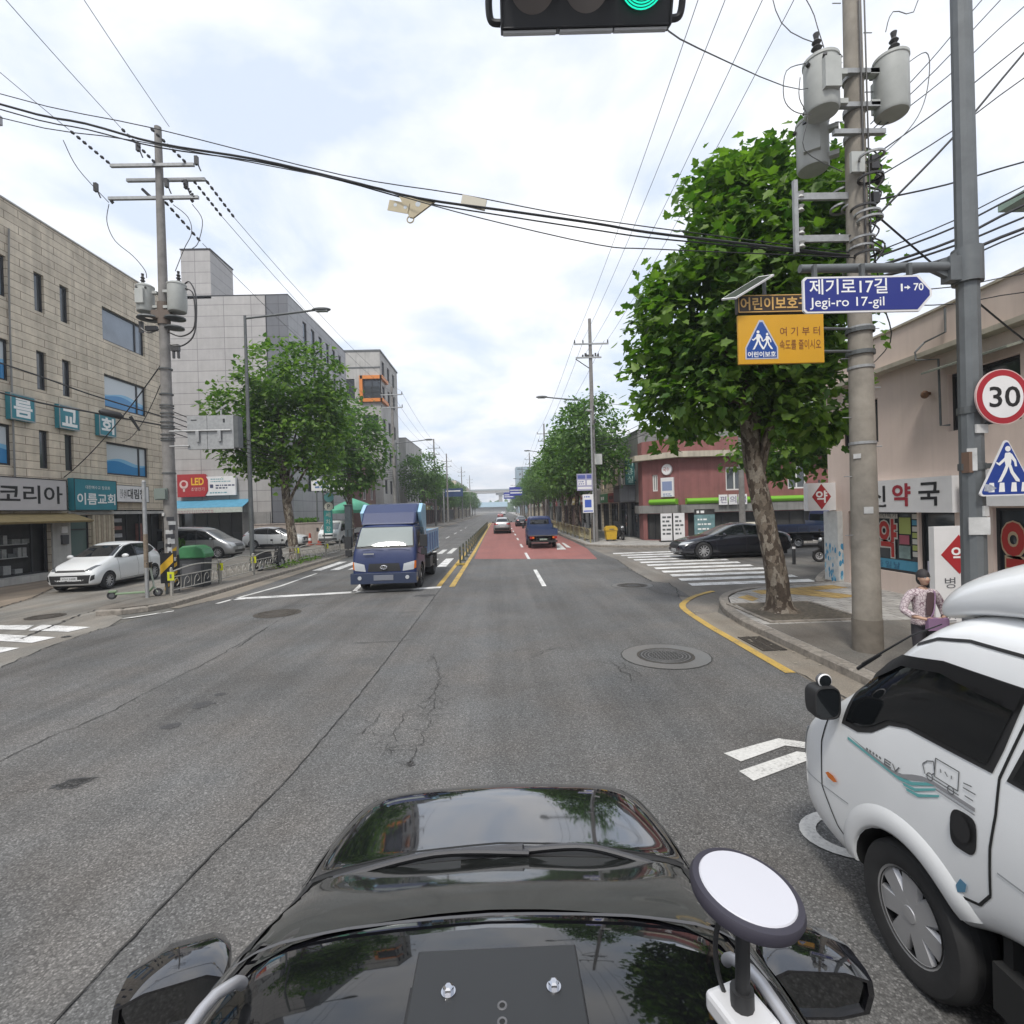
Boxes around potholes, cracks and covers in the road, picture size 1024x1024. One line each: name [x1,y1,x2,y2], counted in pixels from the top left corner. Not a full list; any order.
manhole cover [621,644,712,669]
crack [345,652,450,766]
drain grate [738,636,787,651]
